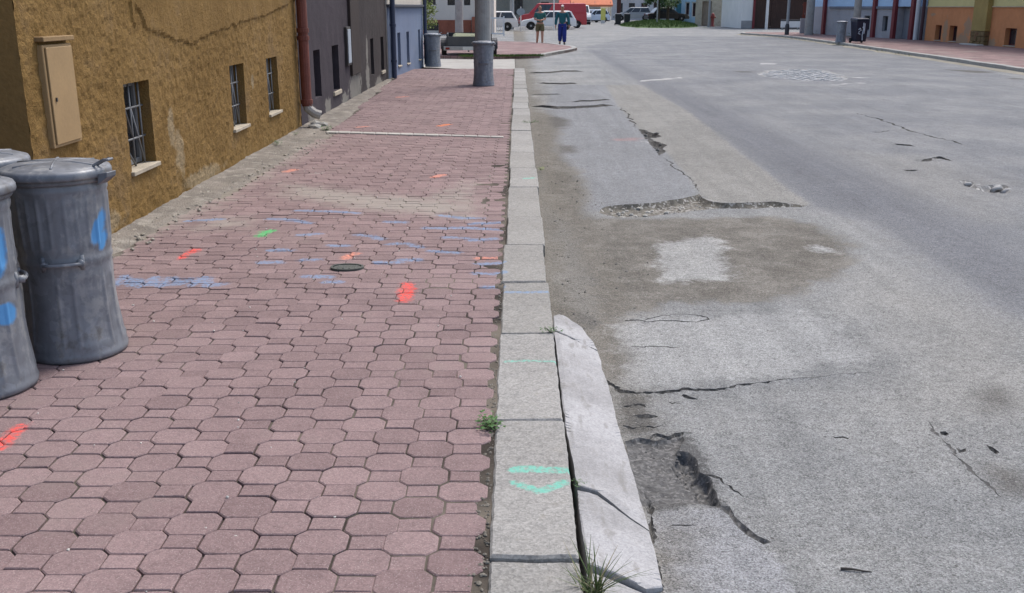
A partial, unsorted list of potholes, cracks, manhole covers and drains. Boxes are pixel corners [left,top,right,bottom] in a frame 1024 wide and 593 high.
pothole [625,435,771,544]
manhole cover [330,263,364,272]
pothole [599,194,804,218]
crack [625,314,710,322]
crack [857,113,961,171]
pothole [959,180,1011,193]
